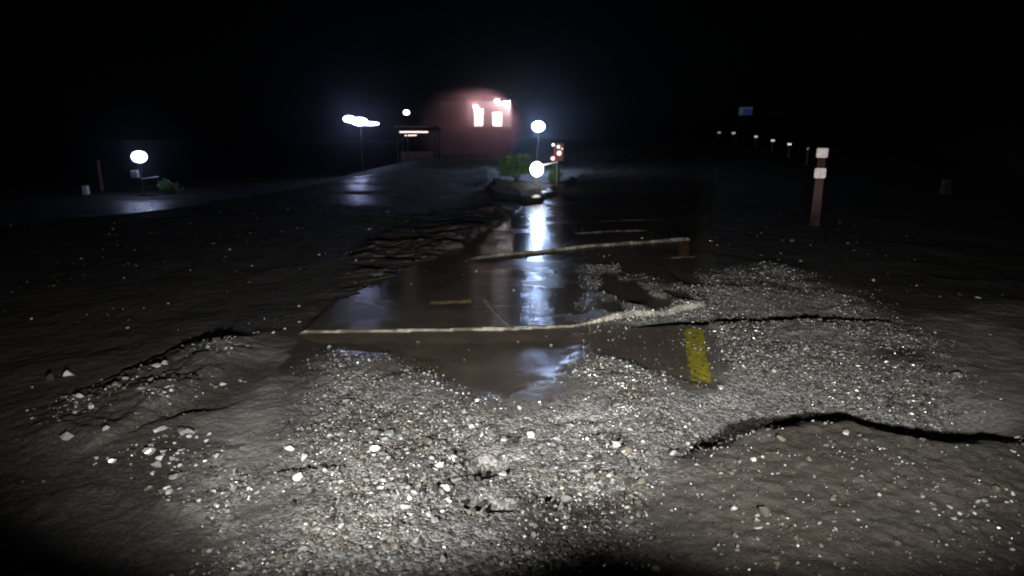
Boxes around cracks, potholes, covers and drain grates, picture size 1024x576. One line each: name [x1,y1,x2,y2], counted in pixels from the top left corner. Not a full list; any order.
pothole [296,328,608,404]
